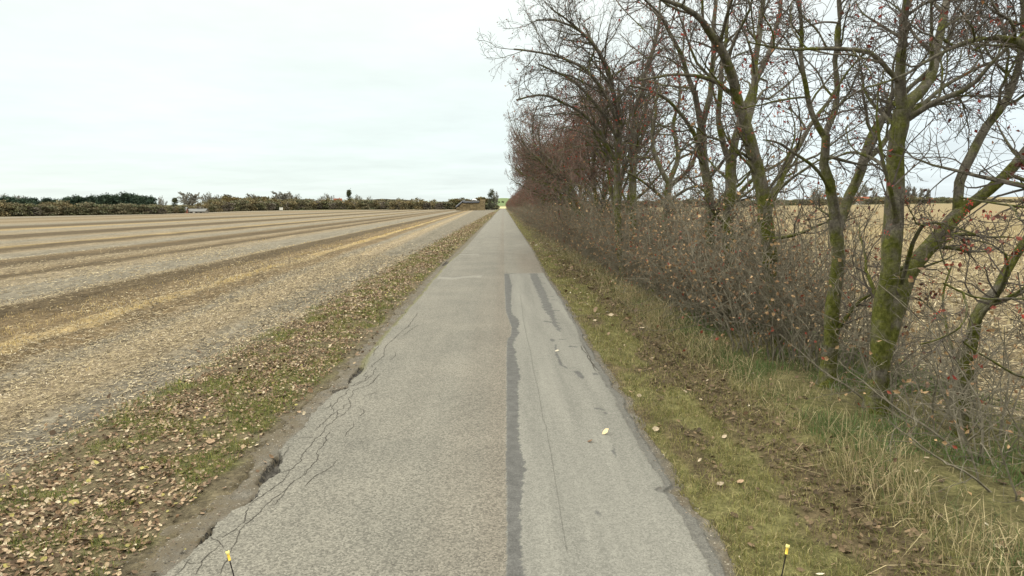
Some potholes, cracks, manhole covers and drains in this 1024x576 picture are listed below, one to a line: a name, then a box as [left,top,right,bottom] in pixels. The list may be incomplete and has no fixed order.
crack [178,314,417,575]
pothole [256,455,283,487]
crack [520,296,567,550]
